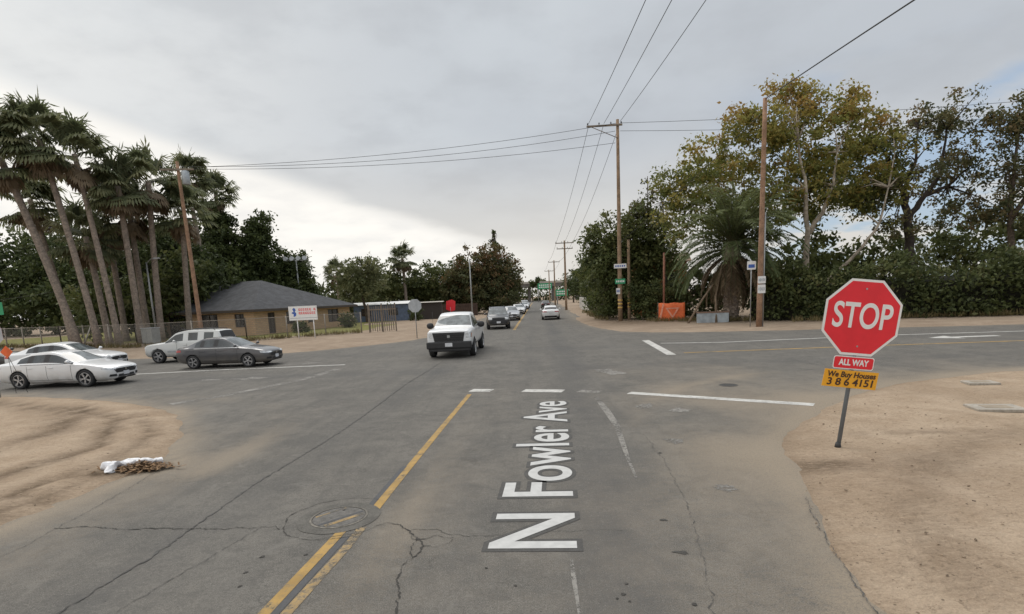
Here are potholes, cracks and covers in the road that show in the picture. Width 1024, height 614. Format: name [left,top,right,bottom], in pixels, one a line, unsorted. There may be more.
crack [283,498,622,614]
manhole cover [309,506,368,528]
